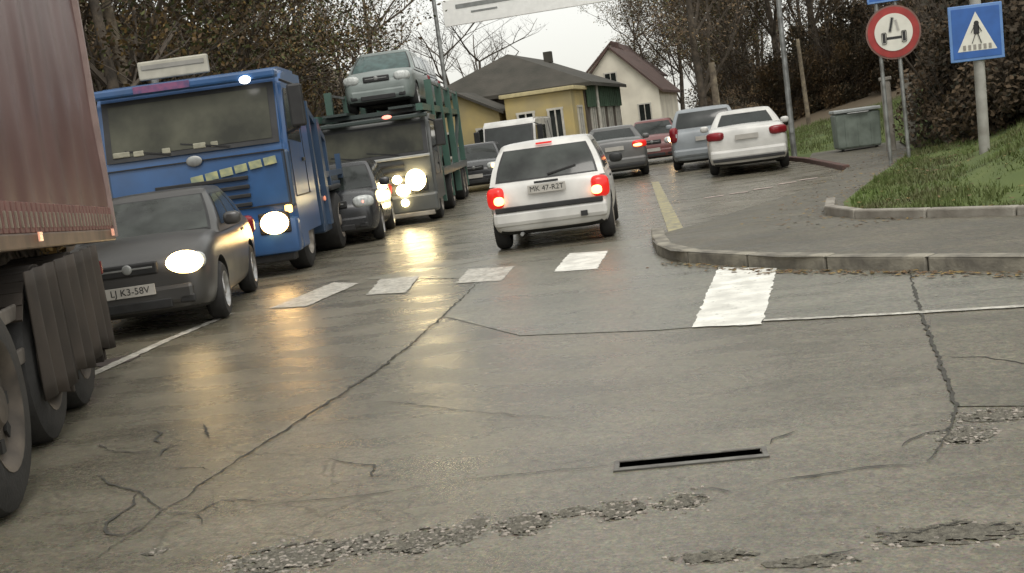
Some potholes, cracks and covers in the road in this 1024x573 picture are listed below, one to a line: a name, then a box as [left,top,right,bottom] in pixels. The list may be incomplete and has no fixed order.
pothole [551,504,591,521]
pothole [586,493,662,529]
crack [902,272,1024,461]
crack [376,401,564,418]
pothole [662,547,760,565]
pothole [439,512,496,559]
pothole [480,508,576,541]
crack [99,430,205,469]
pothole [916,420,1013,450]
pothole [342,518,478,561]
